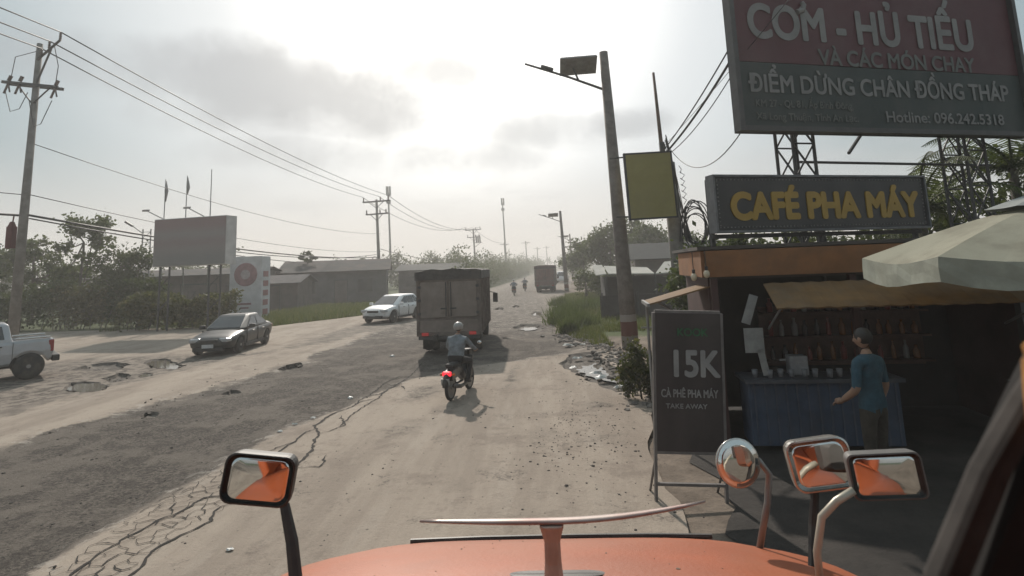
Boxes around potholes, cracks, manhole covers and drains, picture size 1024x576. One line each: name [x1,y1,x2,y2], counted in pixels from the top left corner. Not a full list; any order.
pothole [72,362,130,371]
pothole [63,381,109,393]
pothole [143,358,186,370]
crack [270,363,422,468]
crack [49,468,228,576]
pothole [277,362,303,371]
pothole [102,373,131,382]
